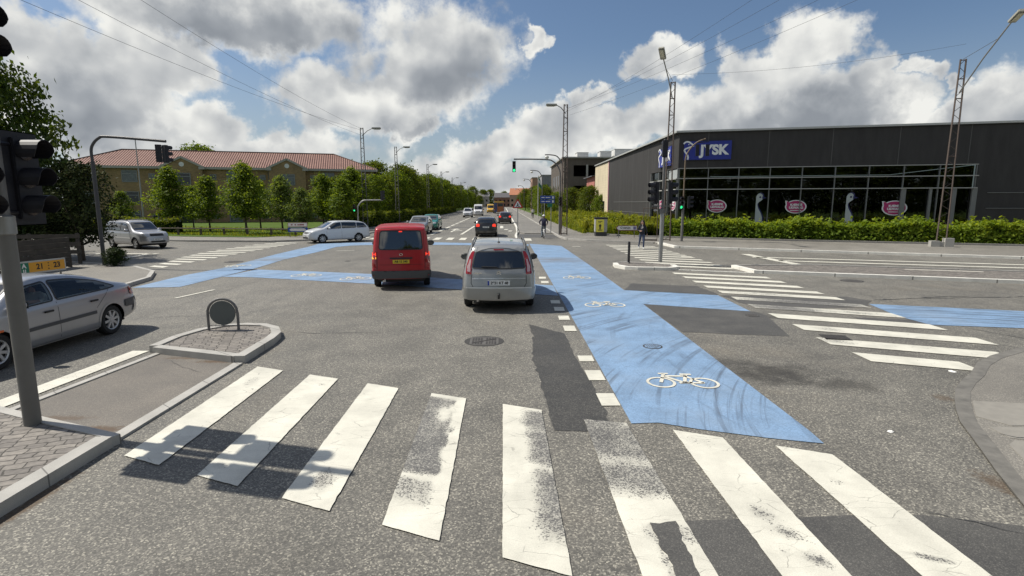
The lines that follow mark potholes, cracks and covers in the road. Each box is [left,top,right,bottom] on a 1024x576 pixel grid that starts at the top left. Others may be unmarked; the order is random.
manhole cover [464,336,504,346]
